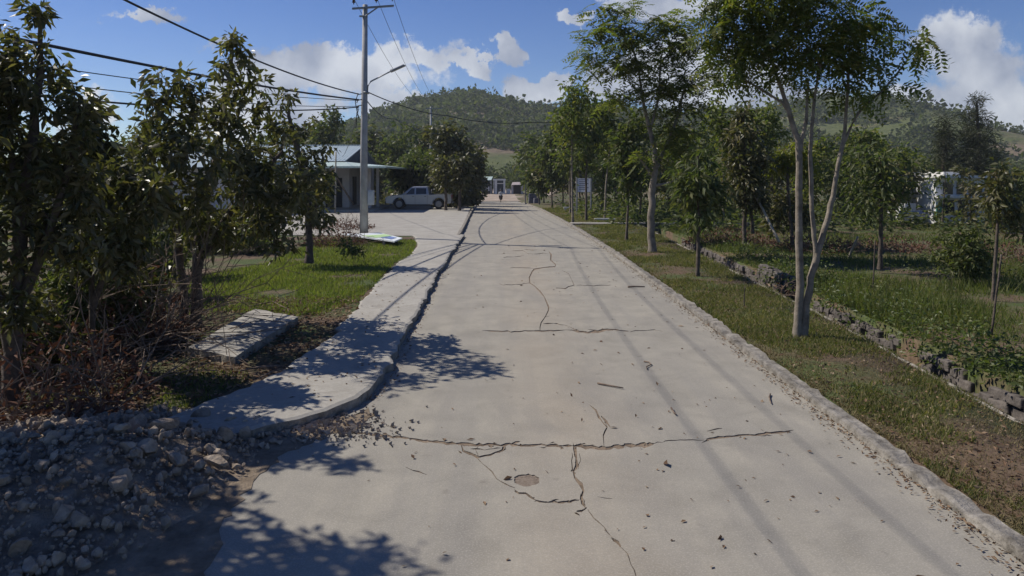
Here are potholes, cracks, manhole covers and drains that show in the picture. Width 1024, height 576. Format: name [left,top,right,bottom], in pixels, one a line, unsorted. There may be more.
crack [482,249,659,334]
